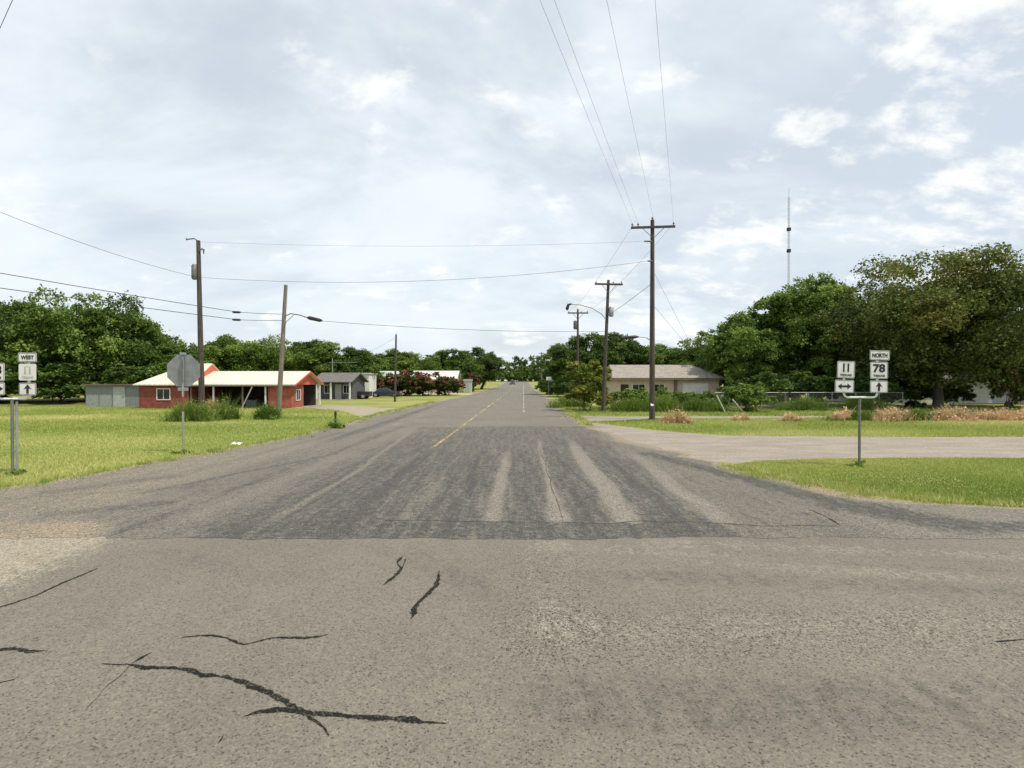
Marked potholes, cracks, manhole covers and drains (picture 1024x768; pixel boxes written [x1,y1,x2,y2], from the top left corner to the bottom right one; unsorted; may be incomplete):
crack [384,557,406,584]
crack [0,568,98,607]
crack [181,634,328,645]
